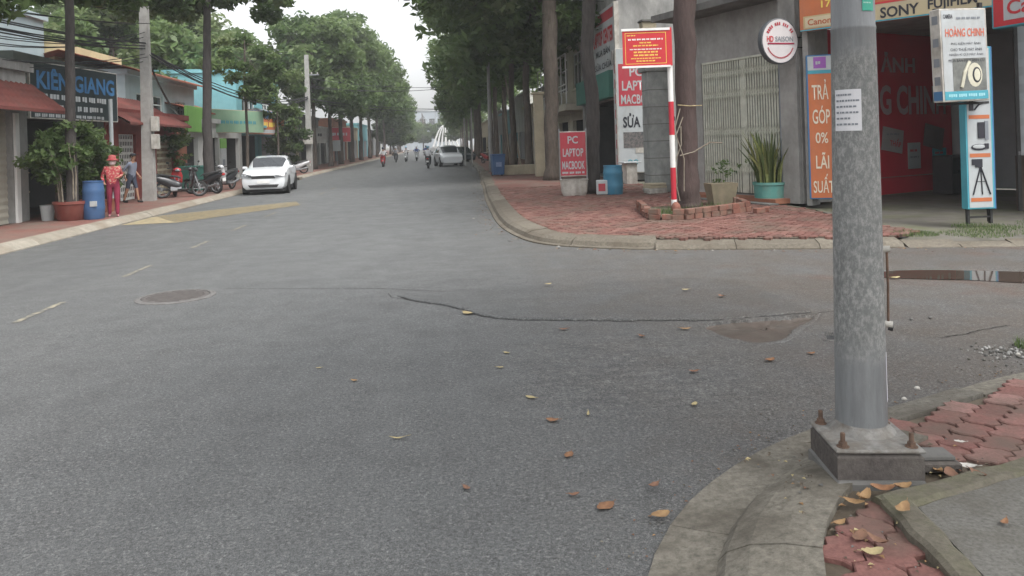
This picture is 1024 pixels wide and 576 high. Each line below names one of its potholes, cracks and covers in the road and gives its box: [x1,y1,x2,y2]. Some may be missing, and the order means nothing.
manhole cover [134,289,216,305]
pothole [697,313,820,345]
